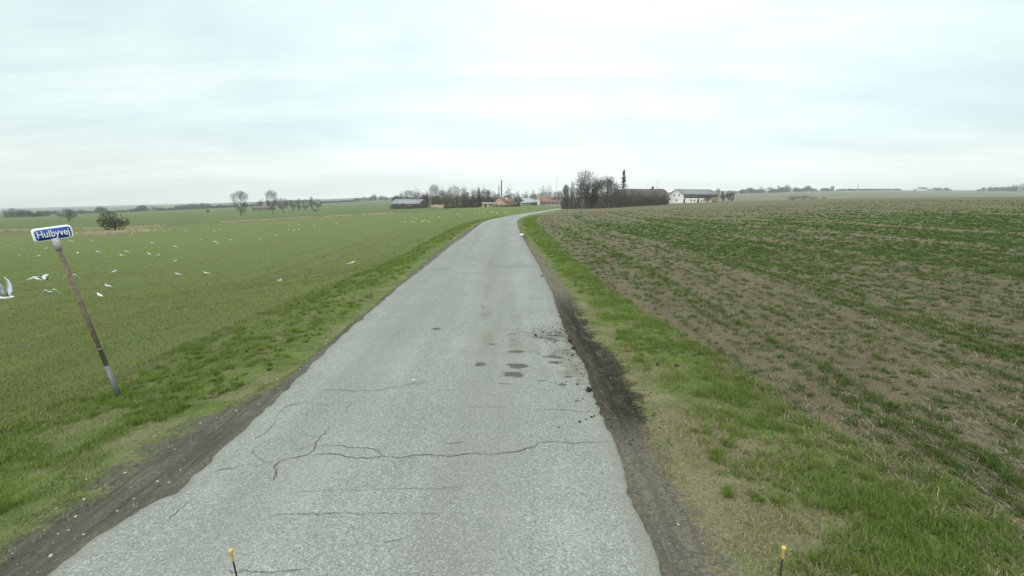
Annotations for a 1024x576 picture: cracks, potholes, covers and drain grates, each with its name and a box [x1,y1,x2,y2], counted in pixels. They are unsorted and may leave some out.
crack [218,382,604,493]
